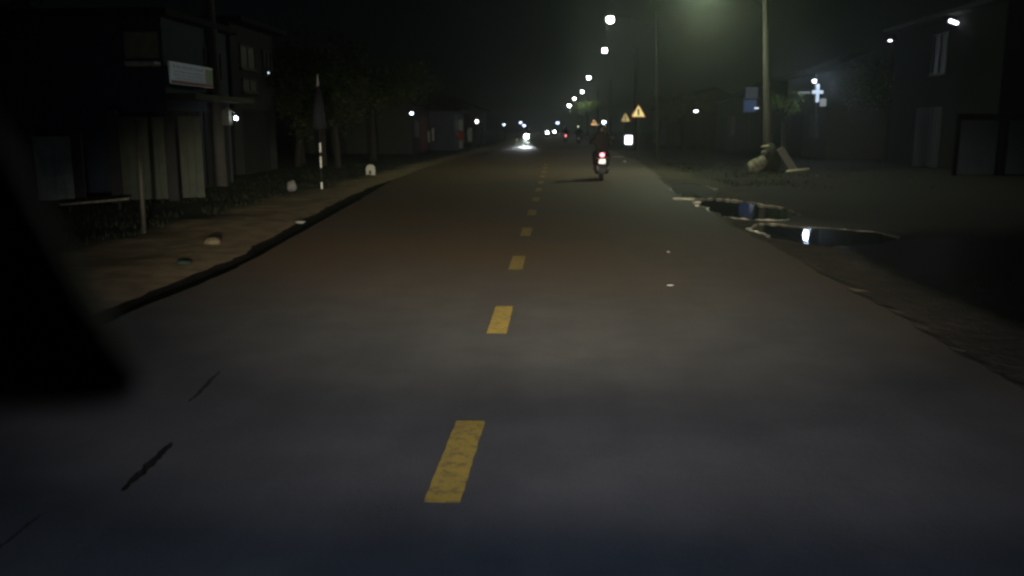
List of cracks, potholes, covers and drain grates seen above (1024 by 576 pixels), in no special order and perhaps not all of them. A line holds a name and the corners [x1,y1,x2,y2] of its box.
crack [189,371,220,401]
pothole [746,223,899,247]
crack [121,442,172,491]
pothole [691,198,800,221]
crack [0,515,40,548]
